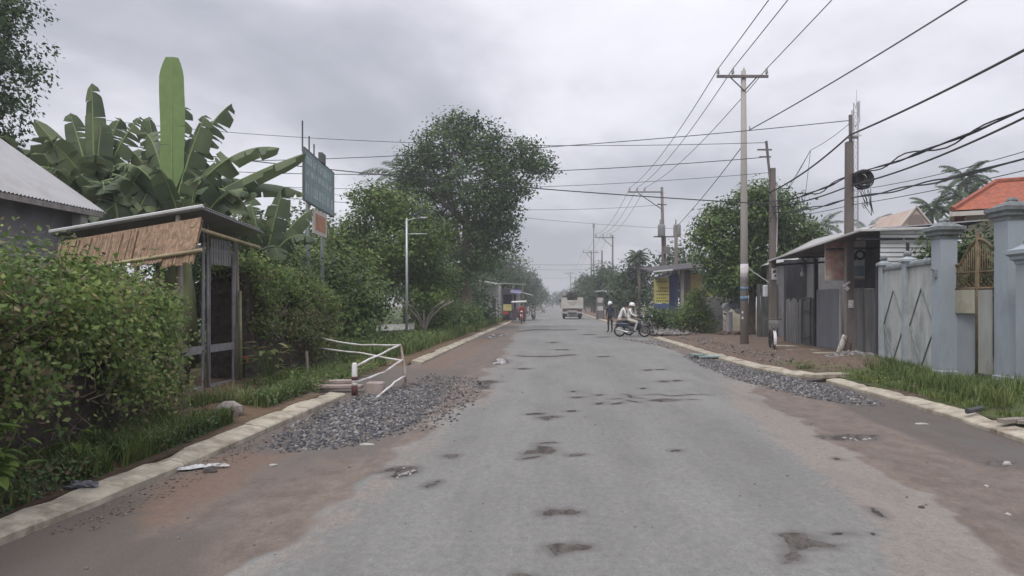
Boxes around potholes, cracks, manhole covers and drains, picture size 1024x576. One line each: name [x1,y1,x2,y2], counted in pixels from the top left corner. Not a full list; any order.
pothole [373,466,418,478]
pothole [521,442,556,460]
pothole [777,533,838,564]
pothole [546,543,592,555]
